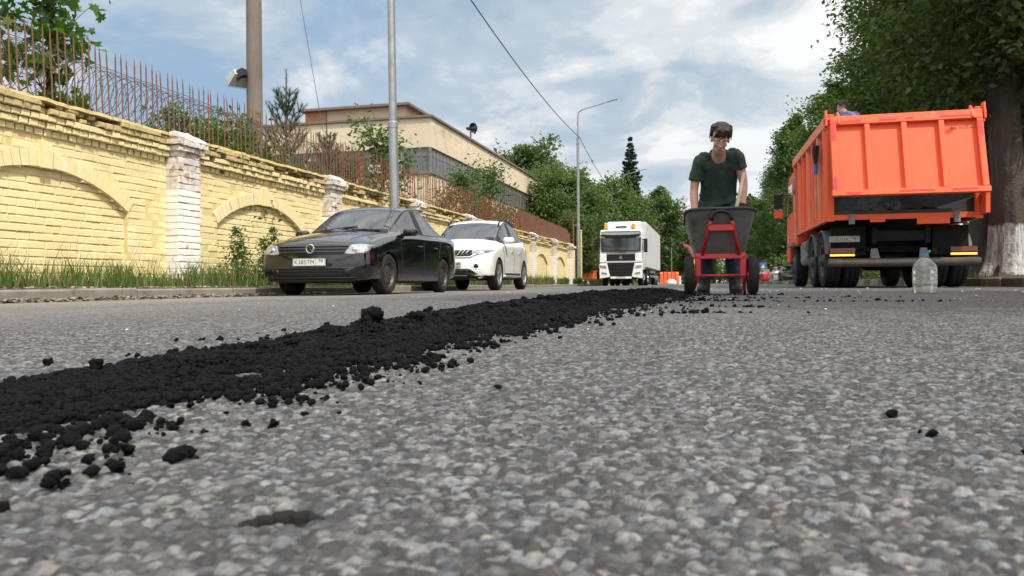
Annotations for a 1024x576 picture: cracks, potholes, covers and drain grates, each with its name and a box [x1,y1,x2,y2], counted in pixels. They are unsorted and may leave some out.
pothole [237,510,323,528]
